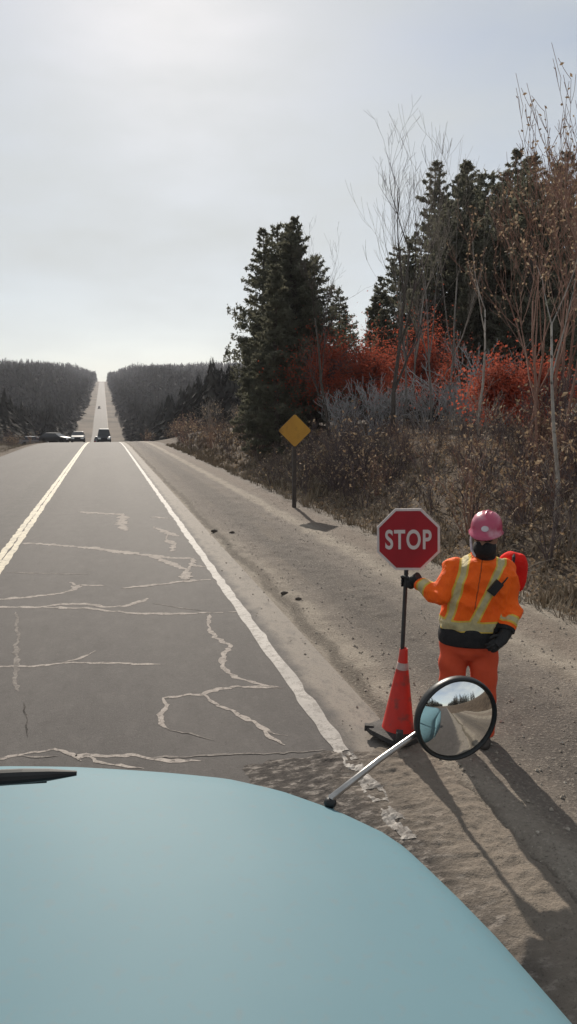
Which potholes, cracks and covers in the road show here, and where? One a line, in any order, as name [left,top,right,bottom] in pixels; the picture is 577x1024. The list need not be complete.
crack [0,512,319,769]
